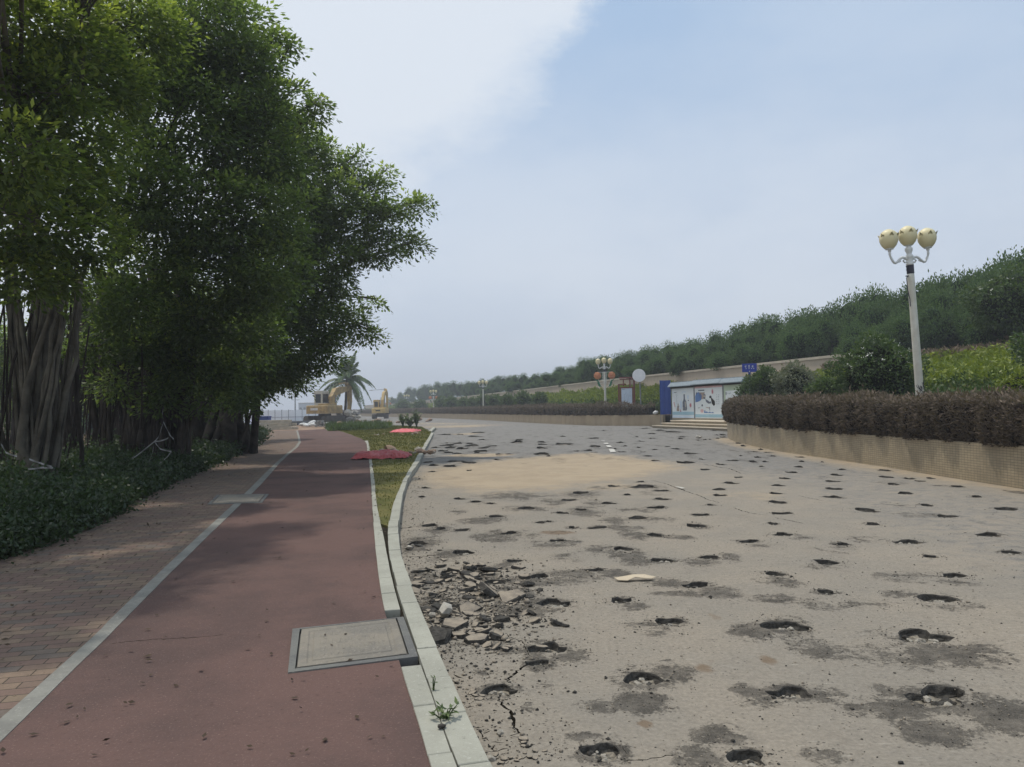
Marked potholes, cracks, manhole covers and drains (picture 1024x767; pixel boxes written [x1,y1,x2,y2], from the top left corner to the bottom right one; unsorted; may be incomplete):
pothole [535,598,571,607]
crack [496,636,536,765]
pothole [623,672,665,686]
pothole [579,742,620,762]
pothole [726,749,765,767]
pothole [903,685,965,708]
pothole [759,621,813,632]
manhole cover [207,494,269,505]
pothole [480,683,518,695]
pothole [916,594,962,603]
pothole [655,618,685,627]
manhole cover [288,617,418,674]
